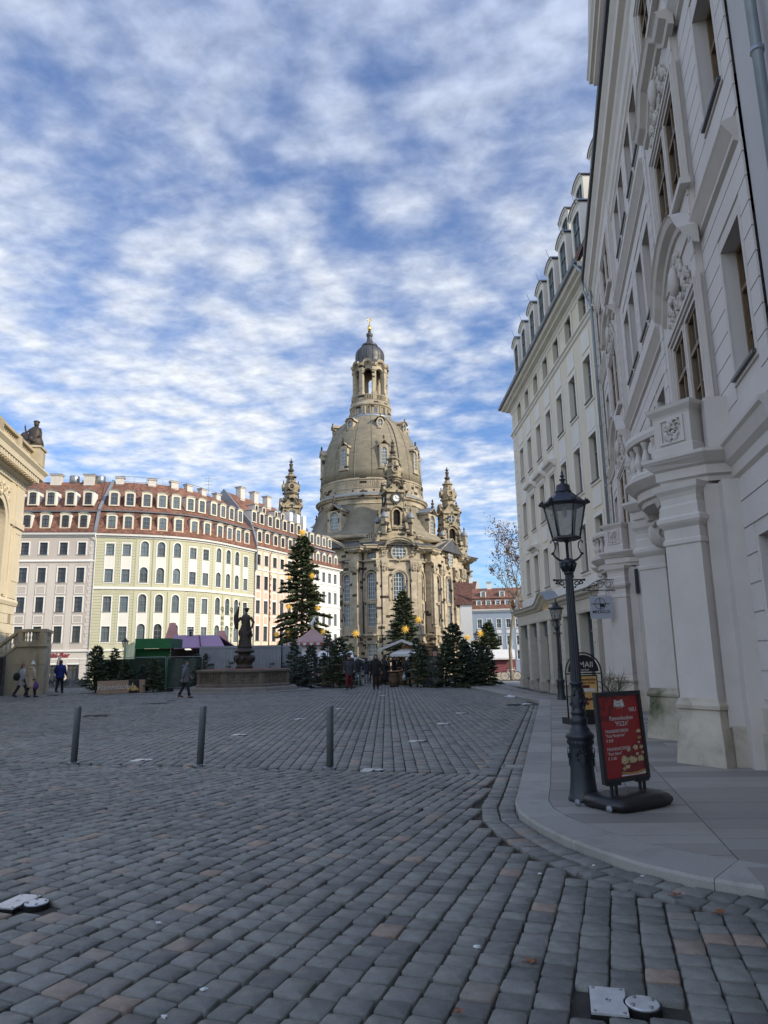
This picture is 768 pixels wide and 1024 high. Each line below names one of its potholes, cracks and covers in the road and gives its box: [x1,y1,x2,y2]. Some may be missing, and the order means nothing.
manhole cover [588,986,630,1024]
manhole cover [22,898,50,913]
manhole cover [623,995,663,1022]
manhole cover [0,894,42,915]
